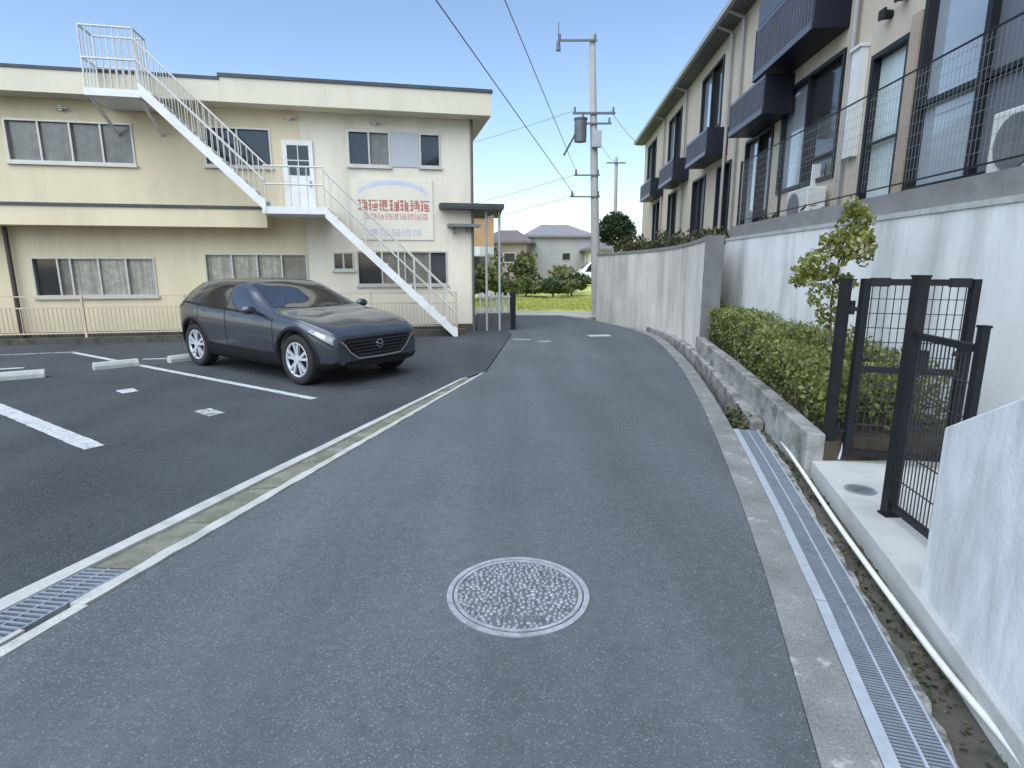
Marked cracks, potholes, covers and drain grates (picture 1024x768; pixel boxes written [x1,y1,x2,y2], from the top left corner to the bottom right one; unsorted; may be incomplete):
manhole cover [447,557,589,638]
